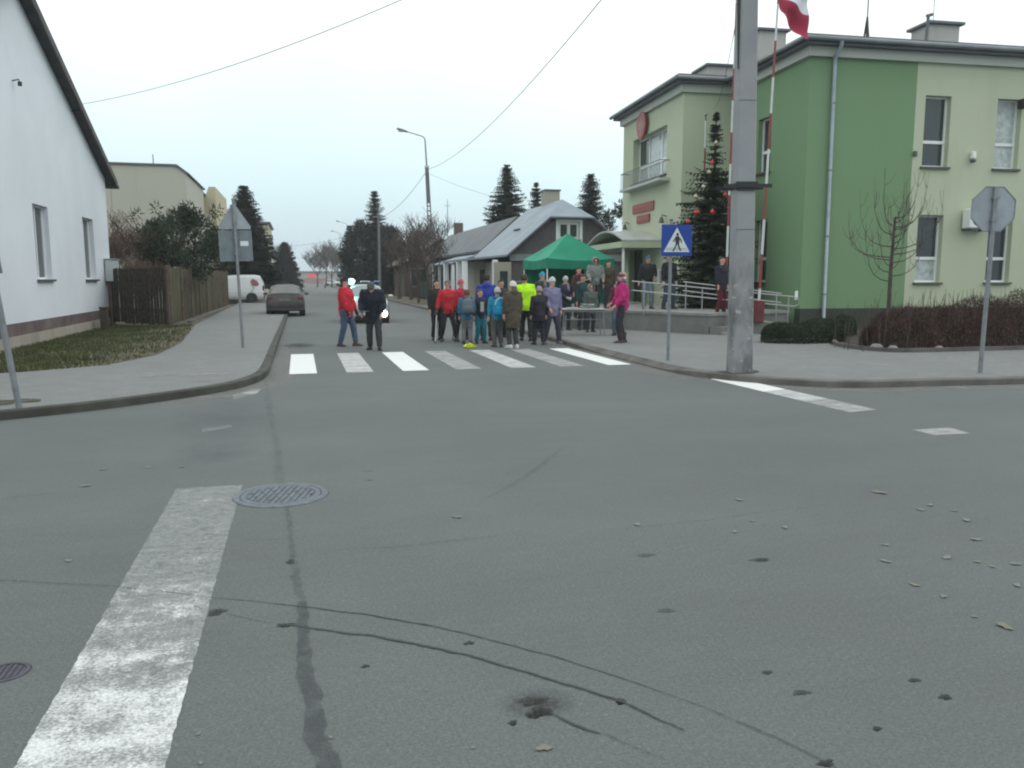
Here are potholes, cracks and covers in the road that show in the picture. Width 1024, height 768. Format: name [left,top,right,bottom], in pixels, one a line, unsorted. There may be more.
crack [213,597,684,733]
manhole cover [232,483,329,508]
pothole [524,707,554,719]
